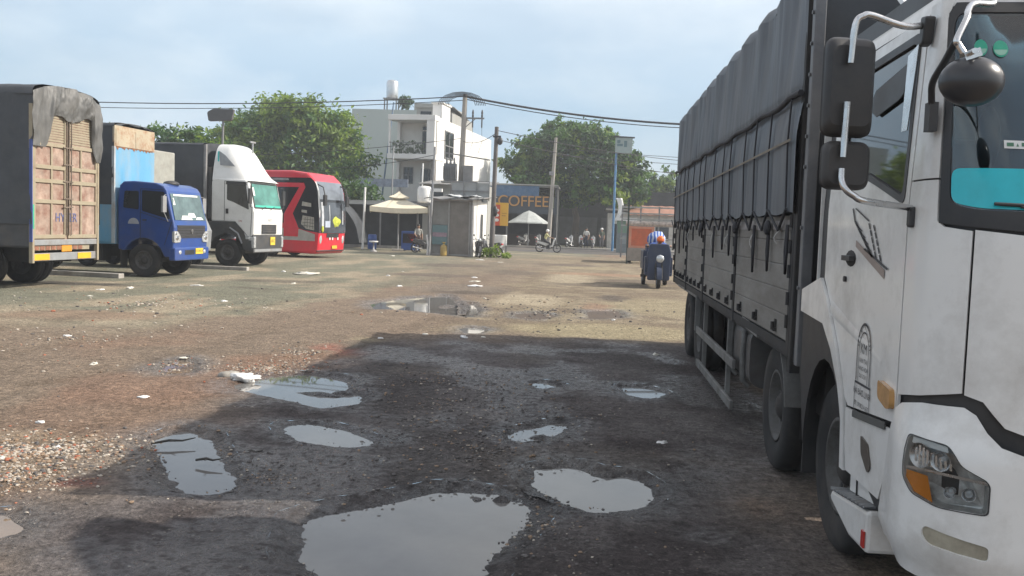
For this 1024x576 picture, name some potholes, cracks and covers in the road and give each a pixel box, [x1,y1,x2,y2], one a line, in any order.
pothole [269,420,387,448]
pothole [495,417,581,442]
pothole [0,506,42,538]
pothole [522,379,569,389]
pothole [511,458,673,515]
pothole [223,370,376,409]
pothole [266,479,561,576]
pothole [611,383,674,399]
pothole [133,424,257,496]
pothole [456,301,484,317]
pothole [362,294,470,315]
